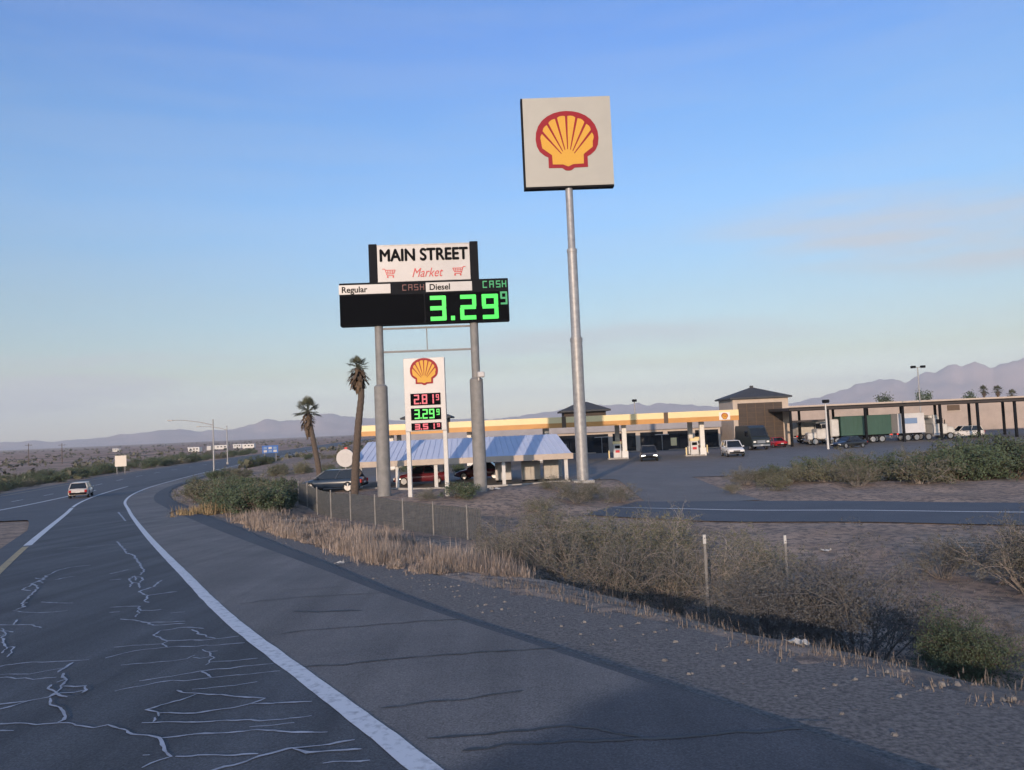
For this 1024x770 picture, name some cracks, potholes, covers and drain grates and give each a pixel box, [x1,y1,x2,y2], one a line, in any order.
crack [303,644,565,667]
crack [430,725,832,751]
crack [0,542,369,770]
crack [381,690,523,708]
